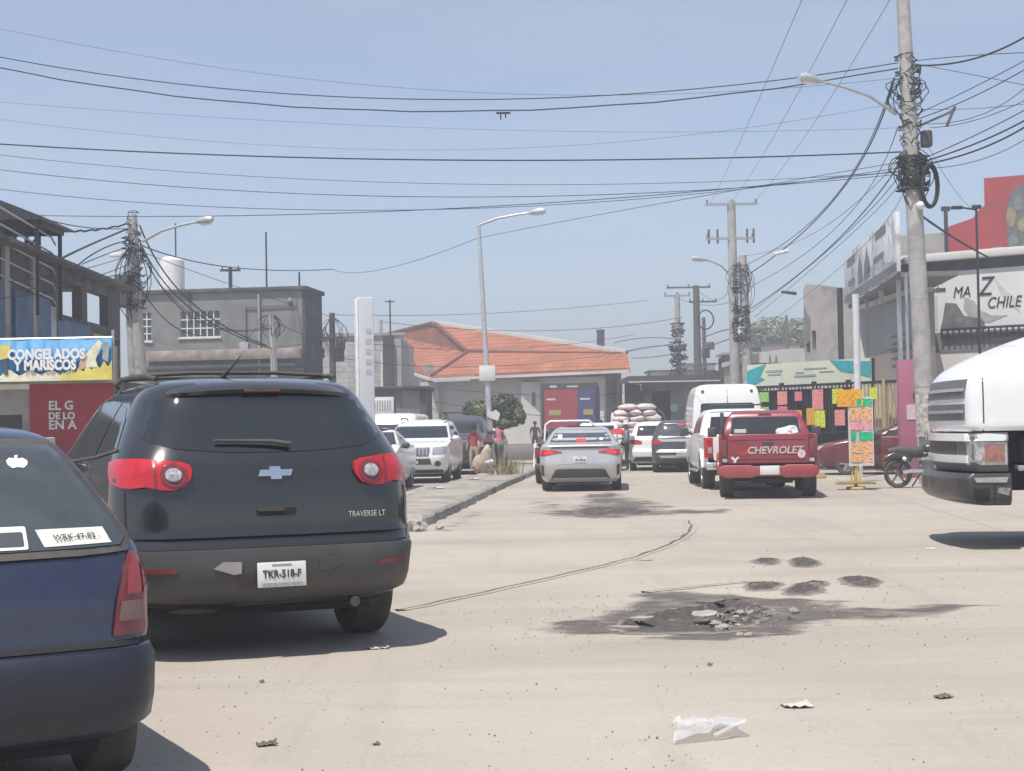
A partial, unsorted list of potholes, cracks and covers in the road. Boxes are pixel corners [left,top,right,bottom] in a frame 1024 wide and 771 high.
crack [396,520,762,611]
pothole [838,575,885,587]
pothole [607,598,775,635]
pothole [743,581,785,591]
pothole [788,556,822,567]
pothole [781,580,829,596]
